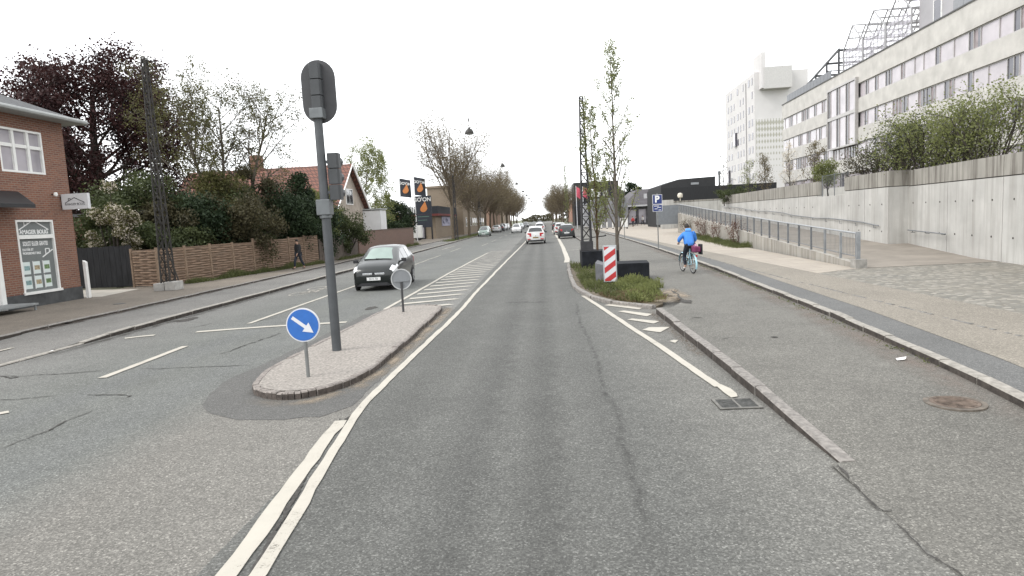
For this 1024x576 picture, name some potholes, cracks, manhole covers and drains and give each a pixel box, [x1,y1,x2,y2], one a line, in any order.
manhole cover [923,396,989,412]
crack [7,394,131,446]
crack [837,465,963,576]
drain grate [711,397,763,410]
